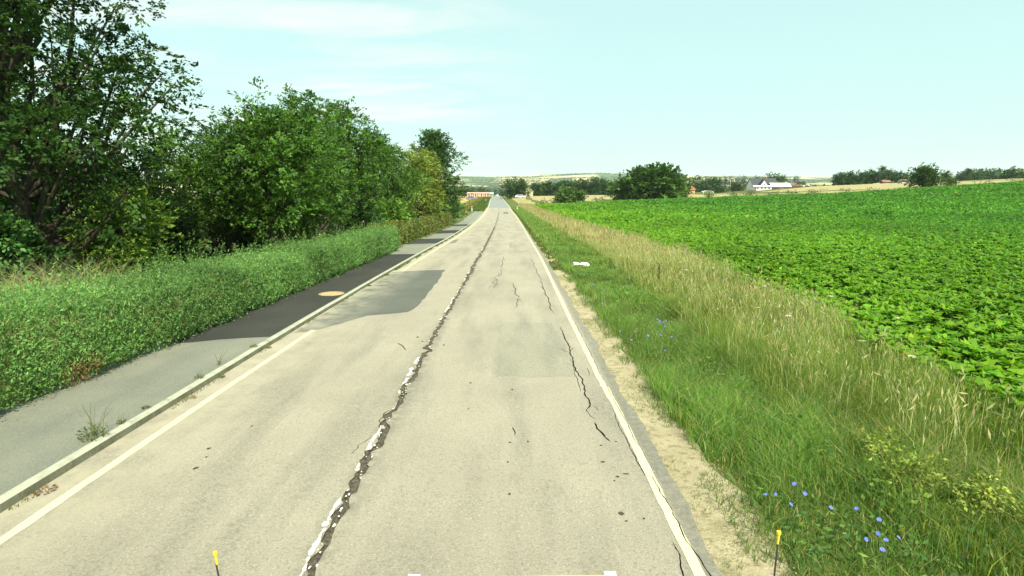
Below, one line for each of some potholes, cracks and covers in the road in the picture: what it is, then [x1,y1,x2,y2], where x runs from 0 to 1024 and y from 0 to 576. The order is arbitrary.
crack [533,262,711,576]
